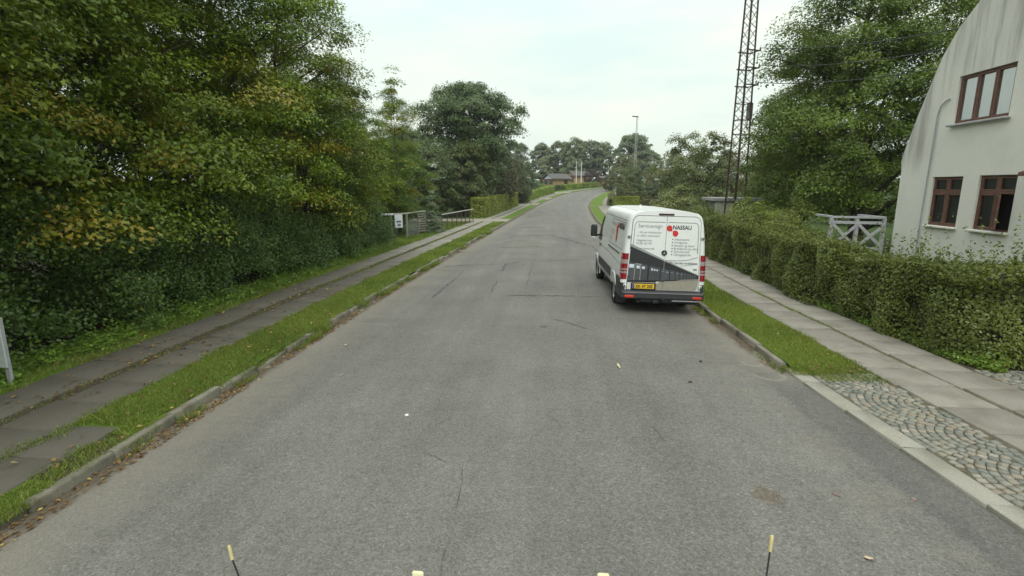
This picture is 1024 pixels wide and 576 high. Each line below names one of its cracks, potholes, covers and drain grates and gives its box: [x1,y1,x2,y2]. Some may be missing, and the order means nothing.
crack [422,452,463,576]
crack [447,227,598,297]
